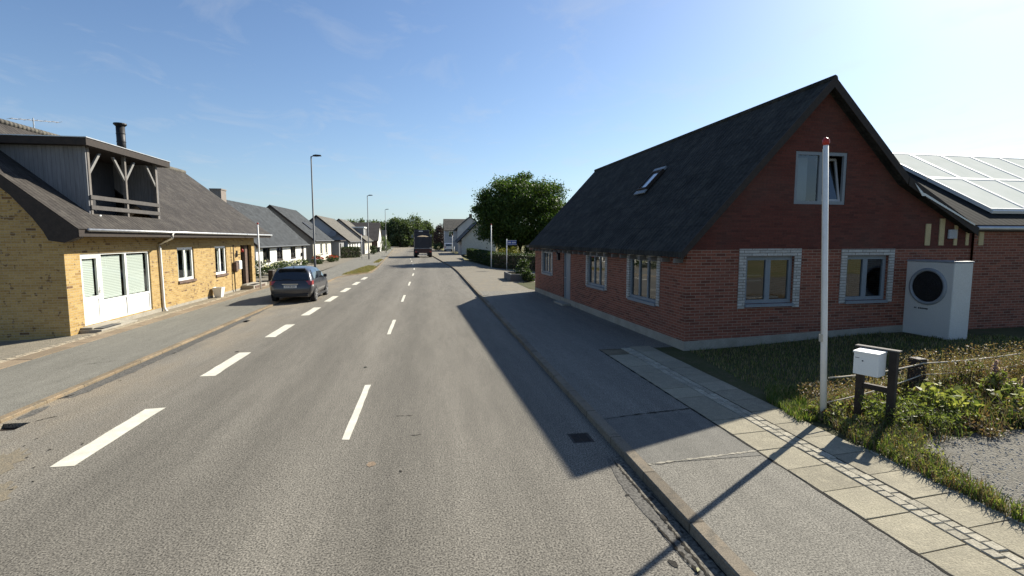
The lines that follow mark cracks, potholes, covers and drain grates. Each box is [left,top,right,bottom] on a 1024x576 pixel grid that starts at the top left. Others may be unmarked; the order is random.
drain grate [567,433,594,443]
